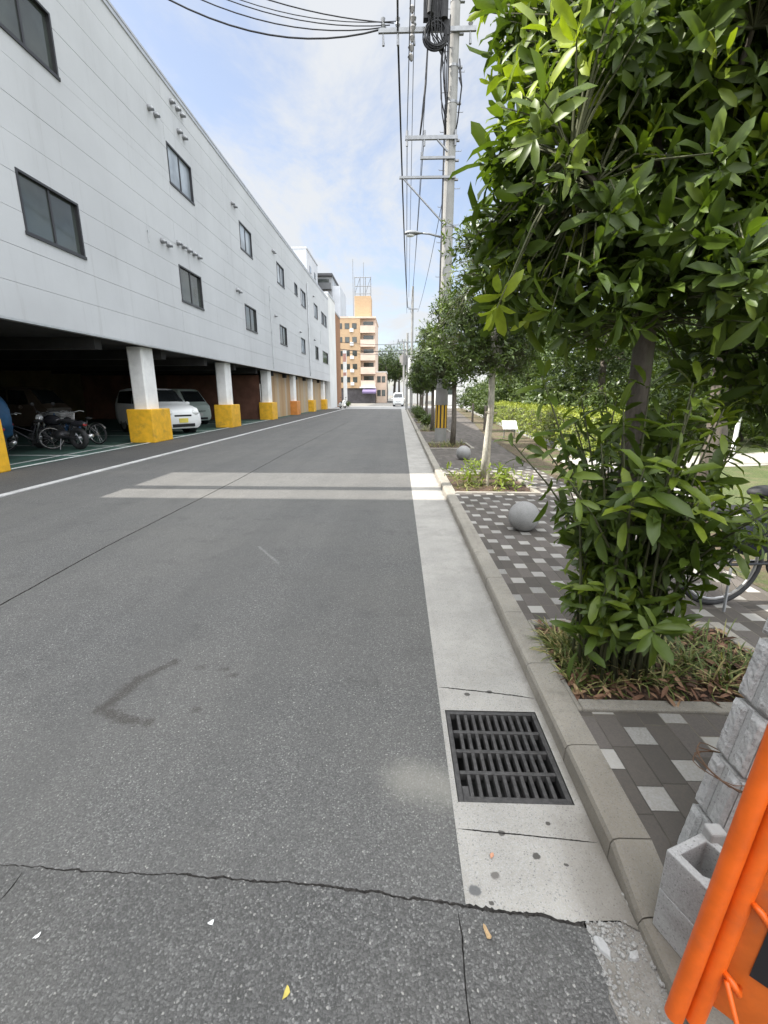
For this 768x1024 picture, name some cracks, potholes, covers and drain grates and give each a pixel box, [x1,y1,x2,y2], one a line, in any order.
drain grate [445,711,573,805]
crack [0,864,585,1024]
